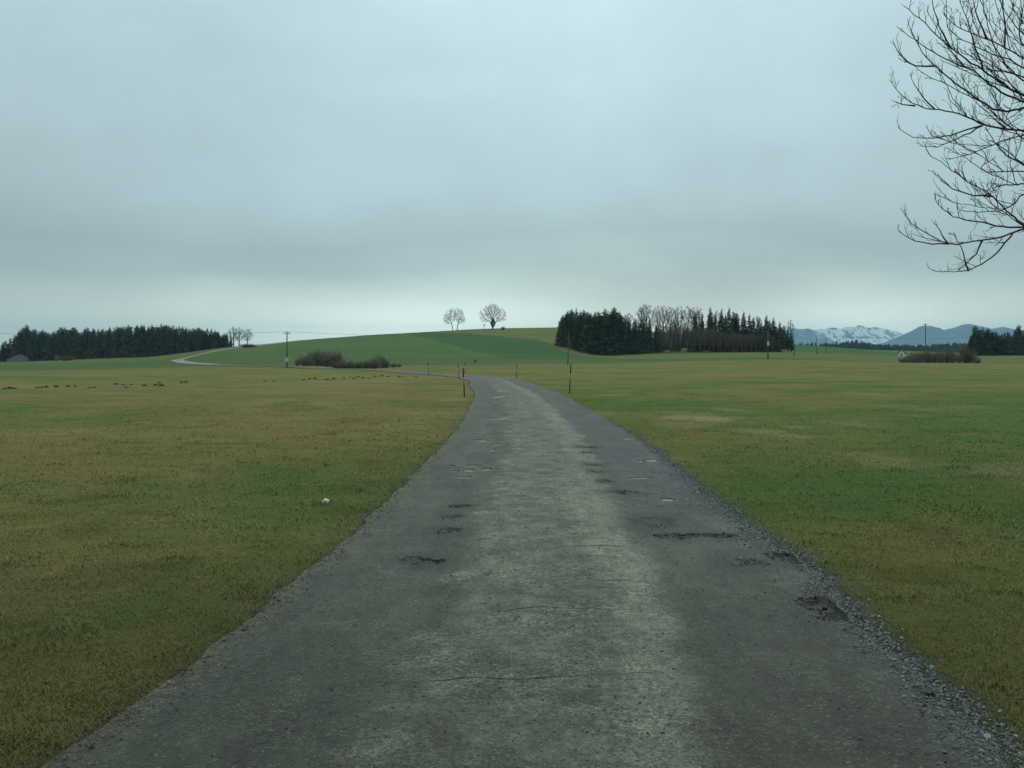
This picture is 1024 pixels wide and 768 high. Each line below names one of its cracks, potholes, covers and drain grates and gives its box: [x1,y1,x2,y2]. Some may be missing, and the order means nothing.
pothole [771,551,801,565]
pothole [797,596,850,621]
